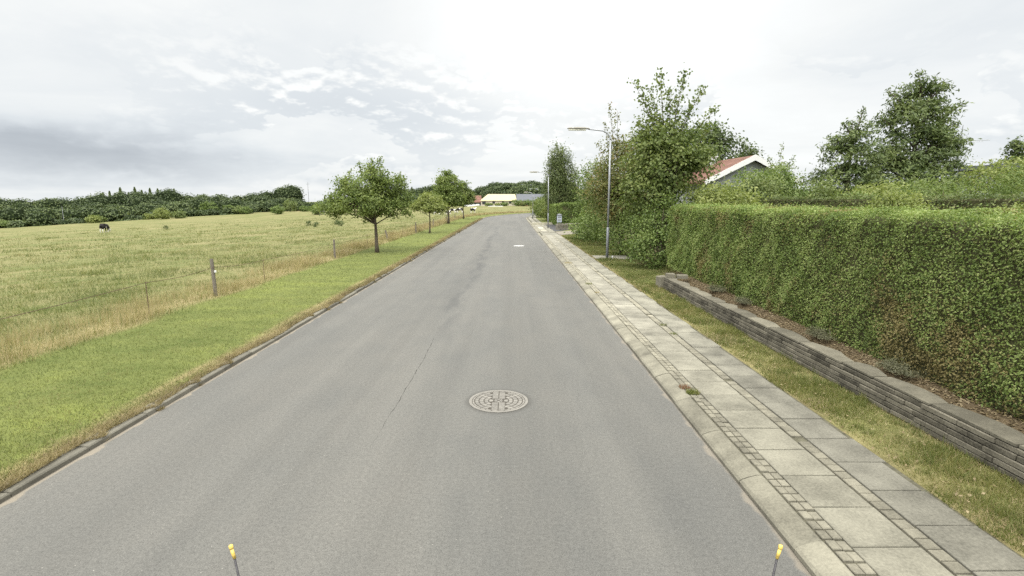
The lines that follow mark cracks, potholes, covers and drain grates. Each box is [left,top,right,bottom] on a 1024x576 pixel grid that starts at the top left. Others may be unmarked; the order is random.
manhole cover [469,390,528,413]
